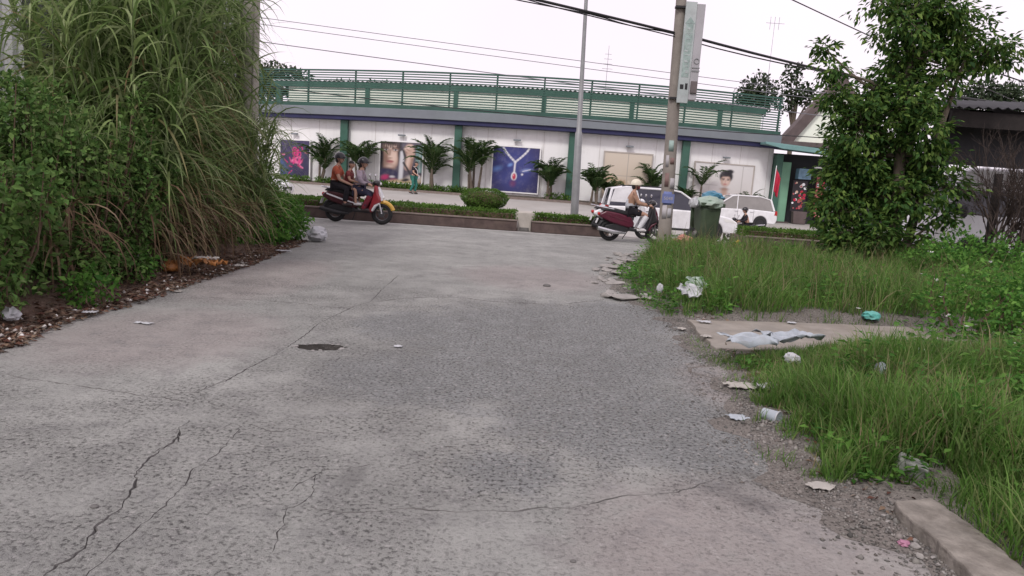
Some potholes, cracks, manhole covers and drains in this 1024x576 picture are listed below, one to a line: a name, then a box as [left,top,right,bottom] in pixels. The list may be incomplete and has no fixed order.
pothole [291,343,349,351]
crack [43,420,334,576]
crack [6,278,608,413]
crack [273,464,736,550]
